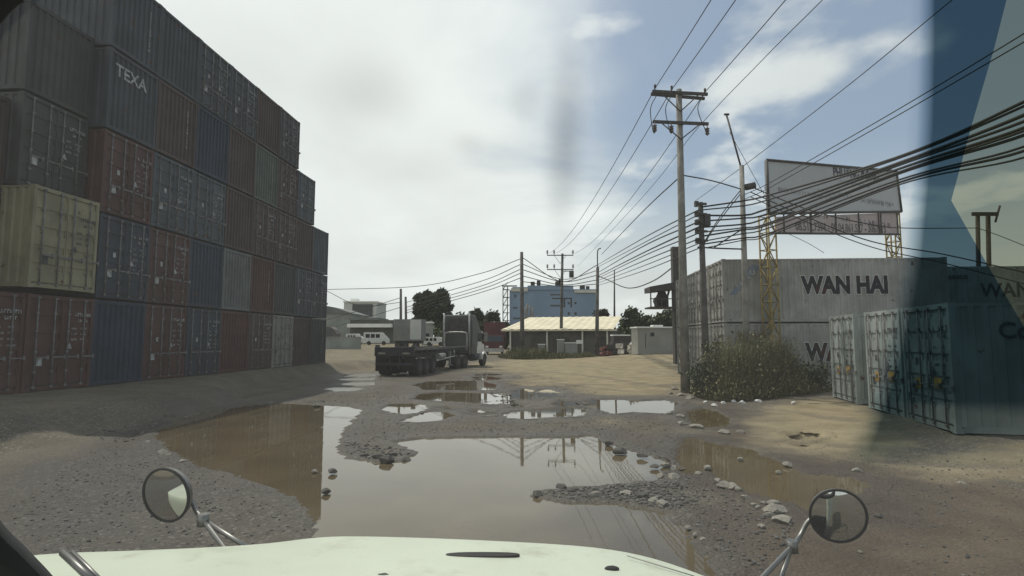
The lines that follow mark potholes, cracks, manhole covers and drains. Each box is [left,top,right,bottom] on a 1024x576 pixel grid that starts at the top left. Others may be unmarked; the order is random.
pothole [576,397,689,414]
pothole [657,434,894,519]
pothole [139,401,749,576]
pothole [403,390,523,405]
pothole [773,427,837,443]
pothole [406,379,503,391]
pothole [542,398,593,407]
